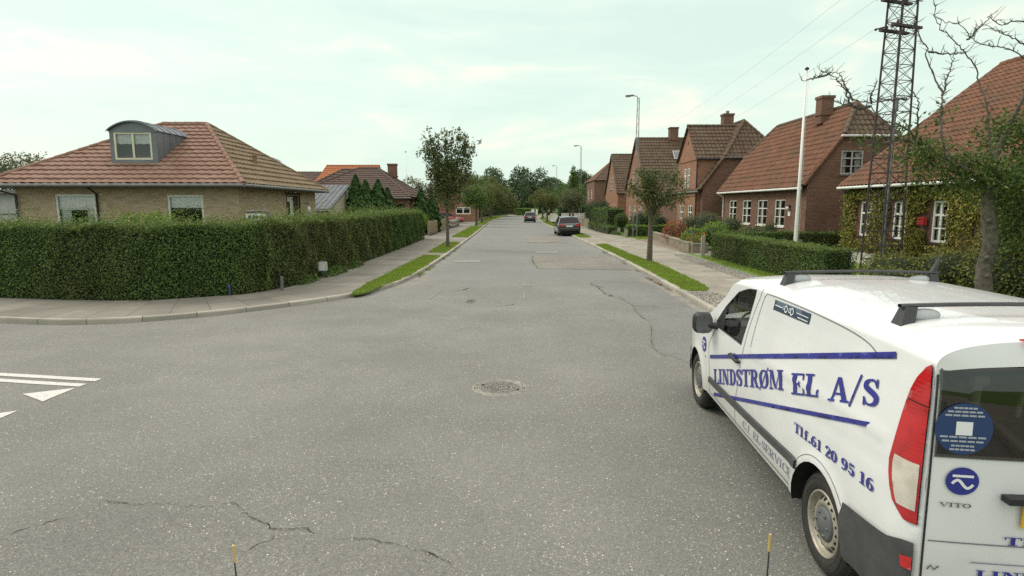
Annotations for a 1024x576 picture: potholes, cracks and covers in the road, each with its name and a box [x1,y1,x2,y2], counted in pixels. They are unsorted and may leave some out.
crack [2,500,316,551]
crack [528,242,665,356]
manhole cover [472,379,528,396]
